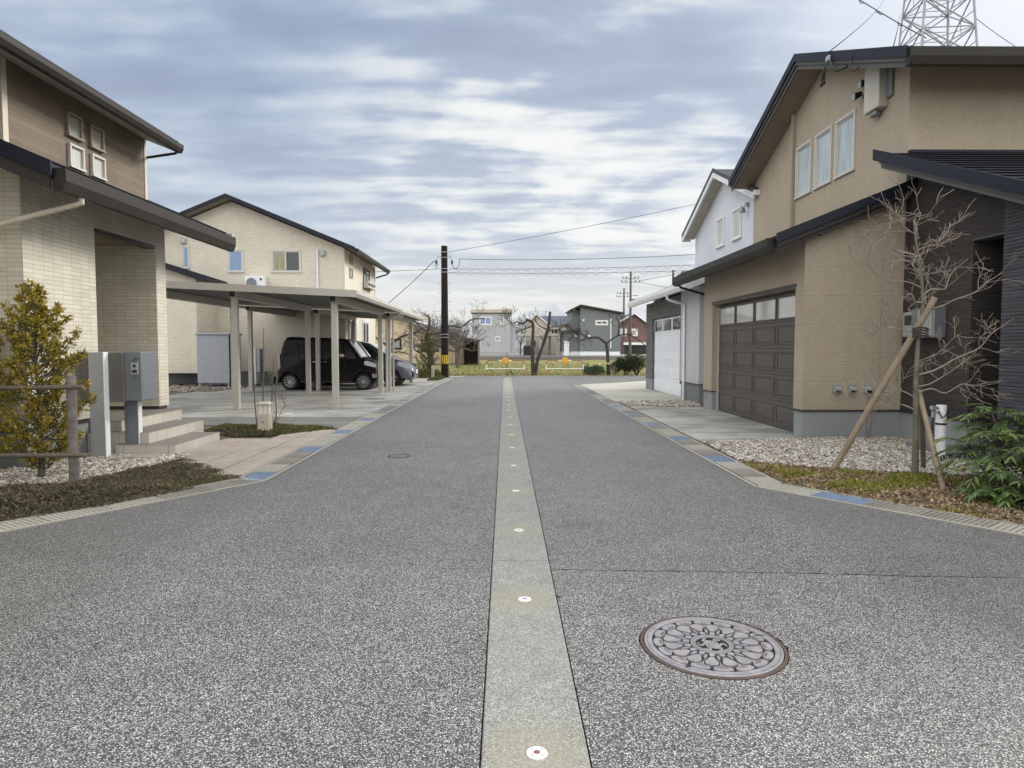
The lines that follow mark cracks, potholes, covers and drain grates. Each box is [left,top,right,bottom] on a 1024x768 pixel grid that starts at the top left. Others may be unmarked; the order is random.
manhole cover [640,616,789,681]
